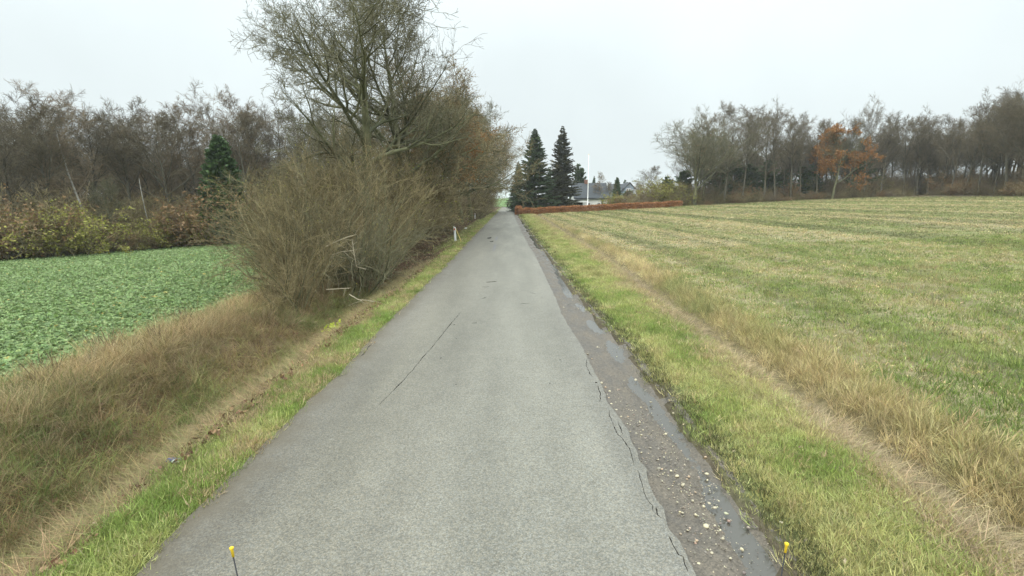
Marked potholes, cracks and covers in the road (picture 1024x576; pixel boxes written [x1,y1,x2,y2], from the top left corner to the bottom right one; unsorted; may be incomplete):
crack [586,360,660,517]
